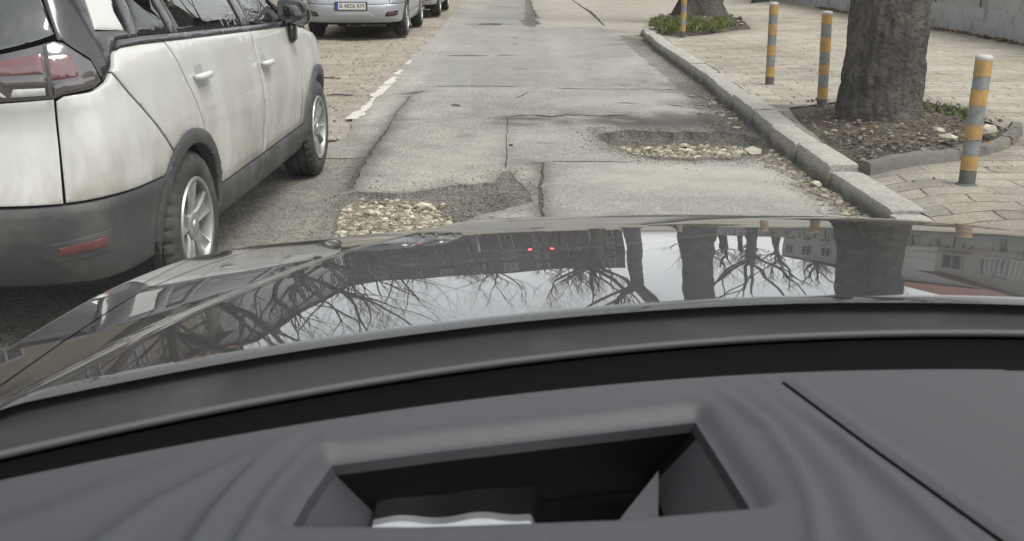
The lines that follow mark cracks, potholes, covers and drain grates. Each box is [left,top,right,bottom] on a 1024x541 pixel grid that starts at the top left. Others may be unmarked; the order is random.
crack [436,86,630,168]
crack [528,161,619,217]
pothole [329,171,533,238]
pothole [598,130,768,161]
